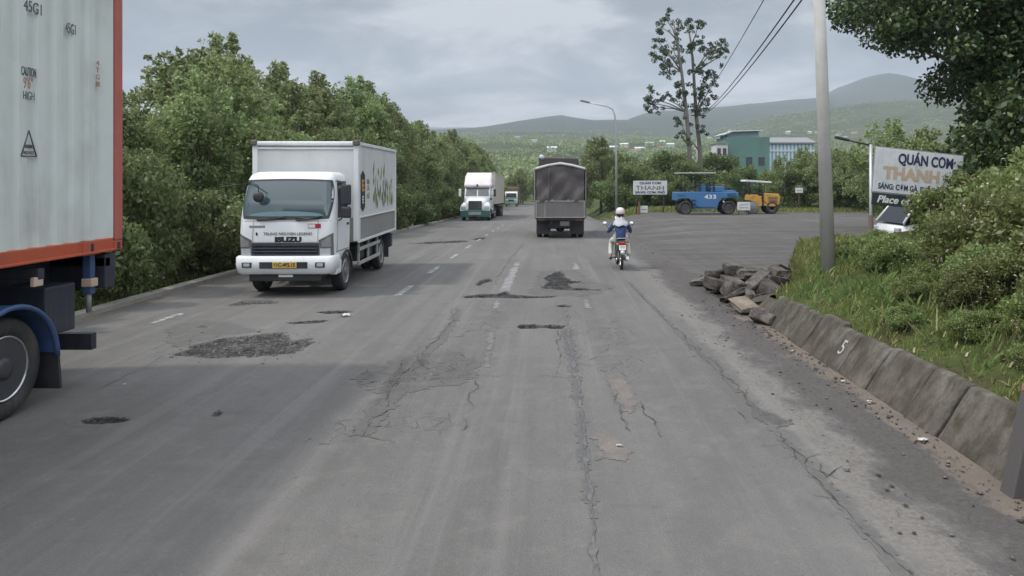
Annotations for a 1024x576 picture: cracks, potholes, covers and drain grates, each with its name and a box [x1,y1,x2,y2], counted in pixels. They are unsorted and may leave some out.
pothole [456,291,565,299]
crack [548,311,642,431]
crack [631,284,753,421]
crack [304,306,505,444]
pothole [508,322,572,331]
pothole [470,278,498,286]
pothole [62,412,146,428]
pothole [537,270,610,291]
pothole [218,299,287,307]
pothole [158,330,323,361]
crack [764,429,914,576]
